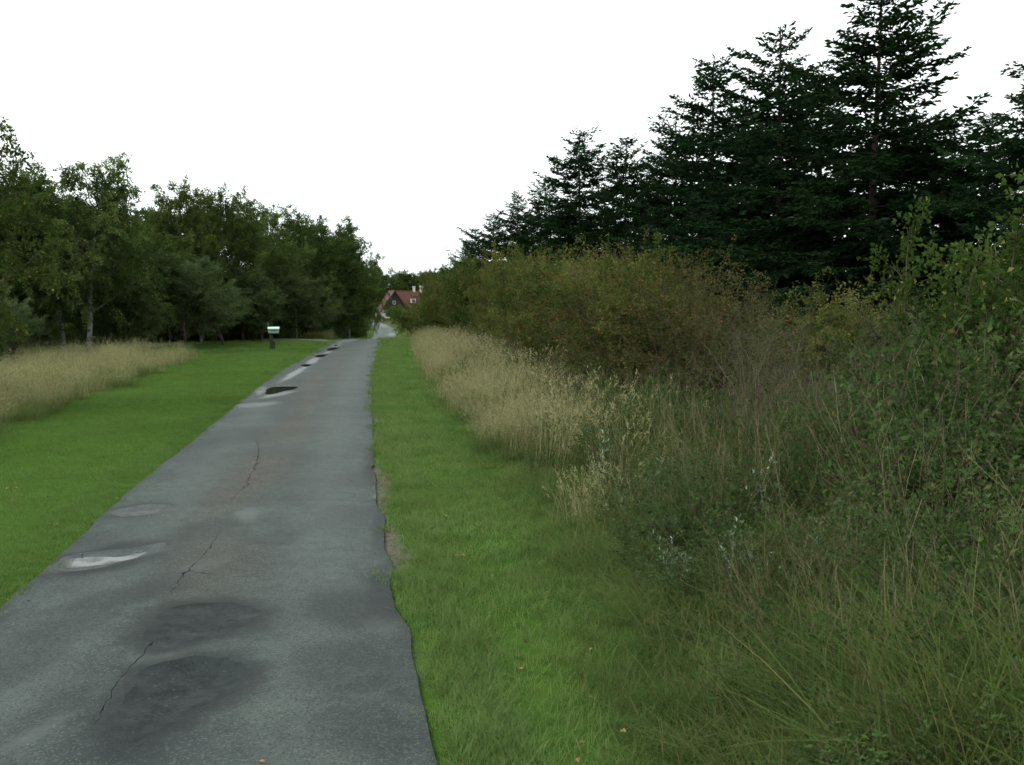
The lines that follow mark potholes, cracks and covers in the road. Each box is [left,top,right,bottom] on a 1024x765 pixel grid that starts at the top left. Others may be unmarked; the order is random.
crack [93,642,153,726]
pothole [113,504,171,516]
pothole [54,542,166,571]
crack [231,440,260,501]
pothole [264,385,299,395]
crack [170,532,218,595]
